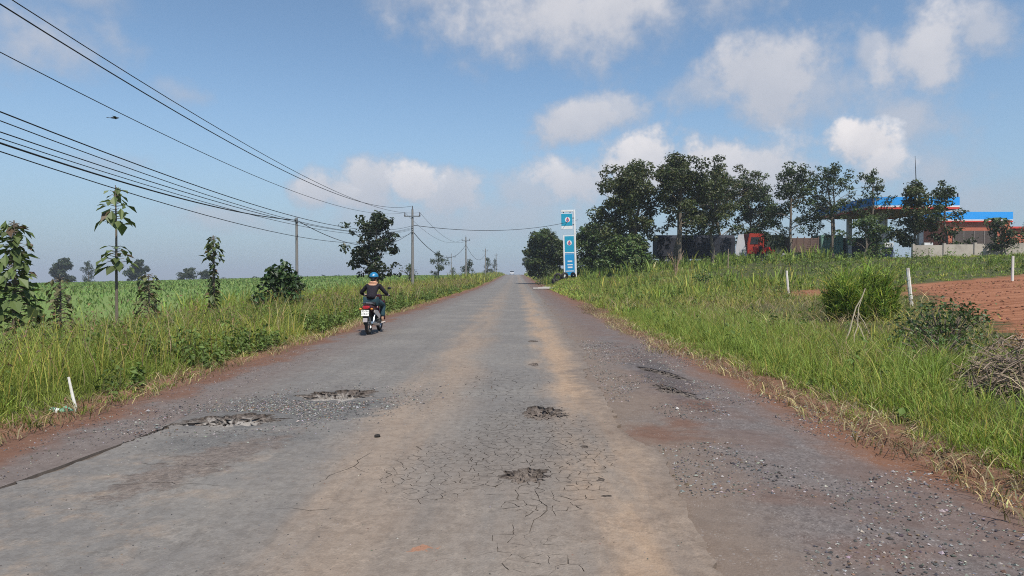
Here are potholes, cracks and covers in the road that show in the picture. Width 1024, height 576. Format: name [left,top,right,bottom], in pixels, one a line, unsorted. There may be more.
pothole [636,366,691,381]
pothole [165,412,291,427]
pothole [650,384,701,400]
pothole [498,467,551,484]
crack [379,371,616,576]
pothole [522,406,569,421]
pothole [294,389,379,401]
